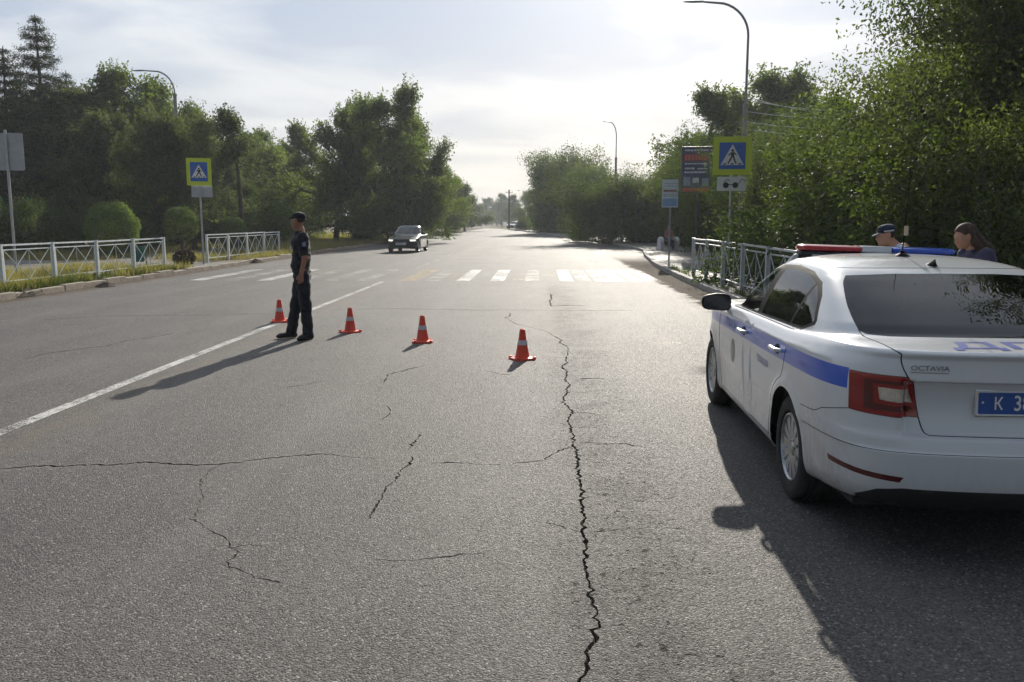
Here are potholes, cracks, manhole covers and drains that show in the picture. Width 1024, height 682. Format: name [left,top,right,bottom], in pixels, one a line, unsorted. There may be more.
crack [6,312,689,682]
